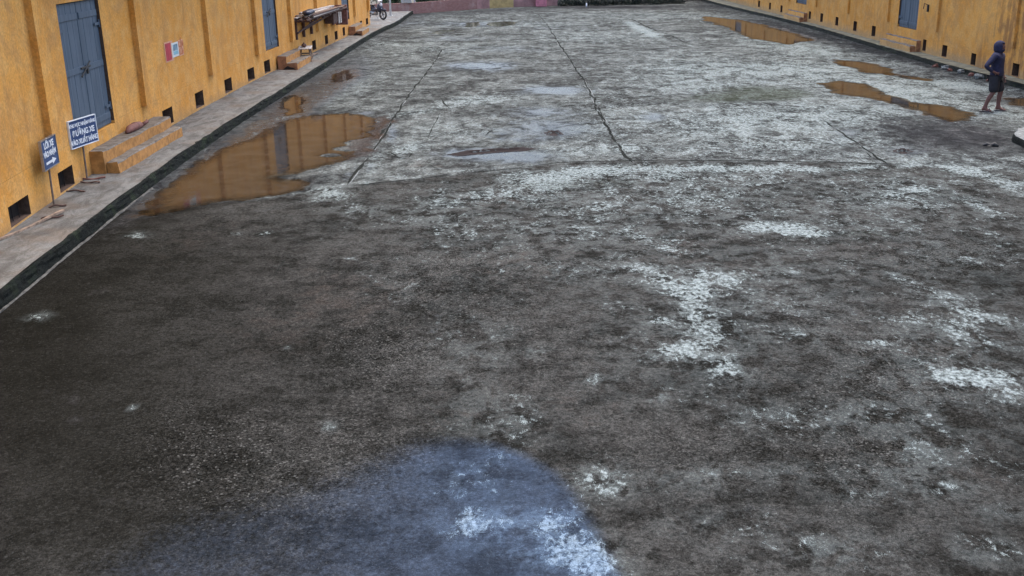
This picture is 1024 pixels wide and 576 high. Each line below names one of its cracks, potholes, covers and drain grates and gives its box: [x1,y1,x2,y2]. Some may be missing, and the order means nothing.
crack [359,14,1002,185]
pothole [447,147,535,156]
